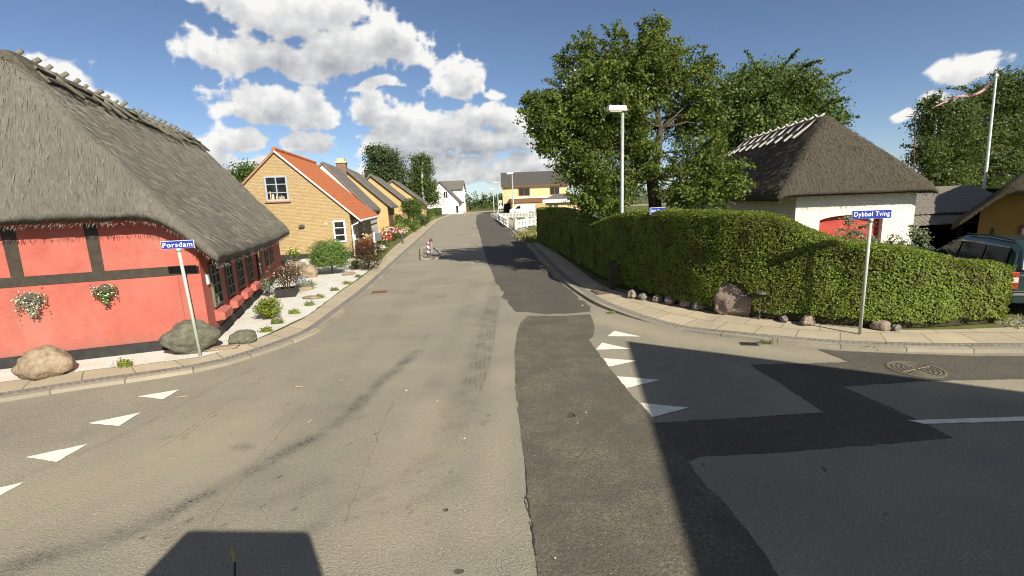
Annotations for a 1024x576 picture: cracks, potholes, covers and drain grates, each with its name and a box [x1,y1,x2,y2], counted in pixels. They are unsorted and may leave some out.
crack [207,399,308,528]
crack [524,465,538,573]
manhole cover [884,361,950,379]
crack [344,402,393,524]
